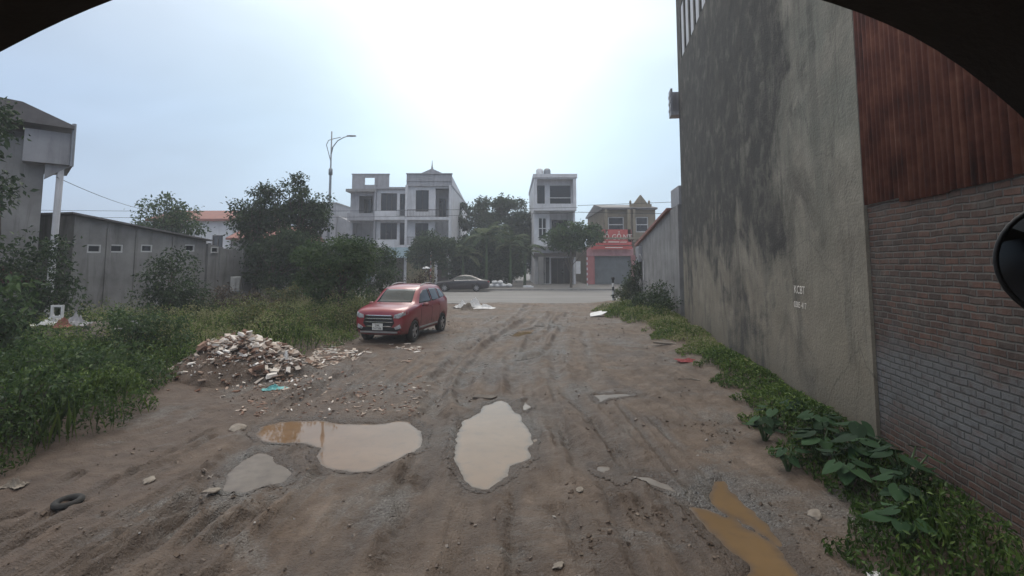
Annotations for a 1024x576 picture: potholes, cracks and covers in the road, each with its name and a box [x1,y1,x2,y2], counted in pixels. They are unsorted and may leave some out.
pothole [246,416,433,475]
pothole [440,397,543,494]
pothole [669,475,818,576]
pothole [213,447,305,496]
